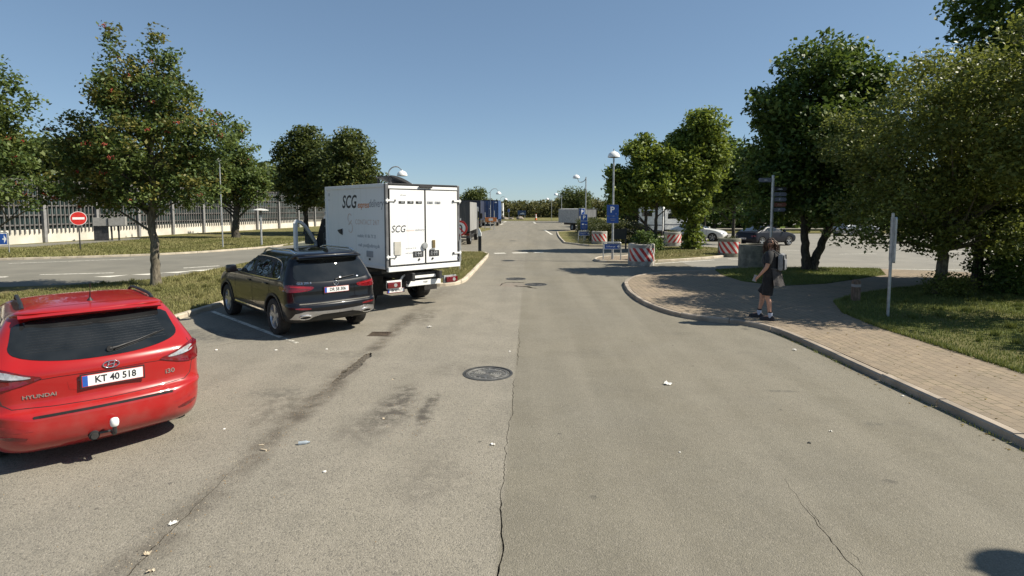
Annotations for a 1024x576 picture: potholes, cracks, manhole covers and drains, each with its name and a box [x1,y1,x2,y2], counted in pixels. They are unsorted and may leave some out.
manhole cover [463,366,513,381]
crack [782,476,863,576]
crack [497,382,514,576]
crack [127,461,242,576]
